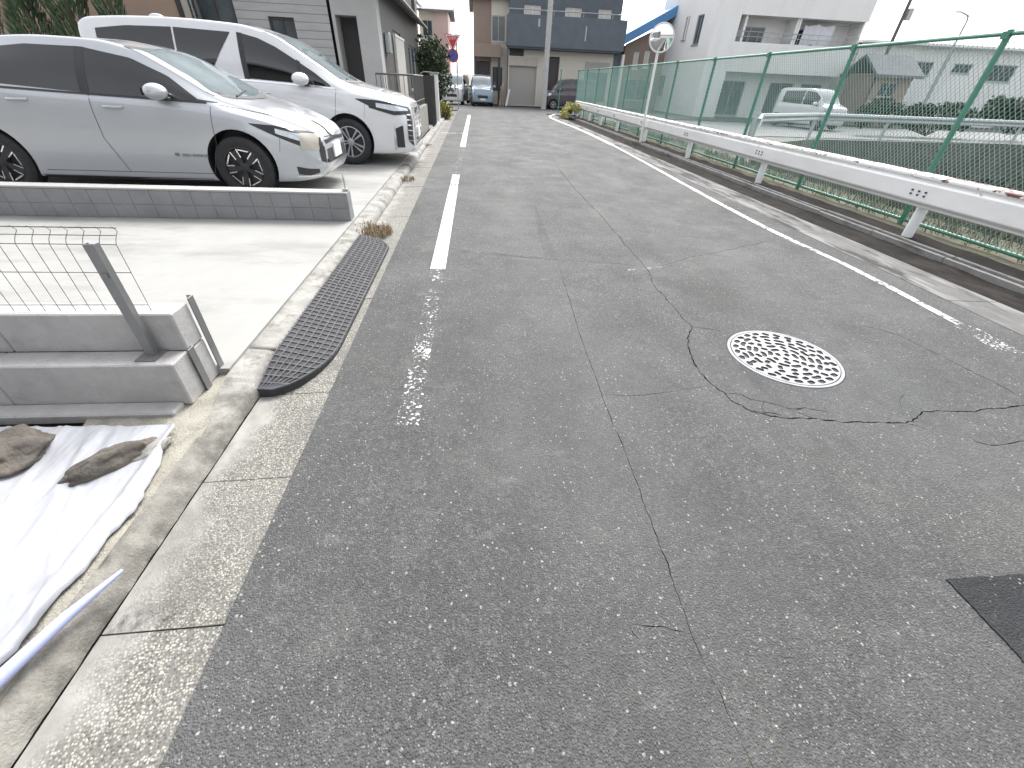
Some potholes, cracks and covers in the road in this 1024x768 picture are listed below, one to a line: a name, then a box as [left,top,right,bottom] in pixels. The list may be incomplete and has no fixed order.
crack [616,277,1024,429]
manhole cover [726,331,845,389]
